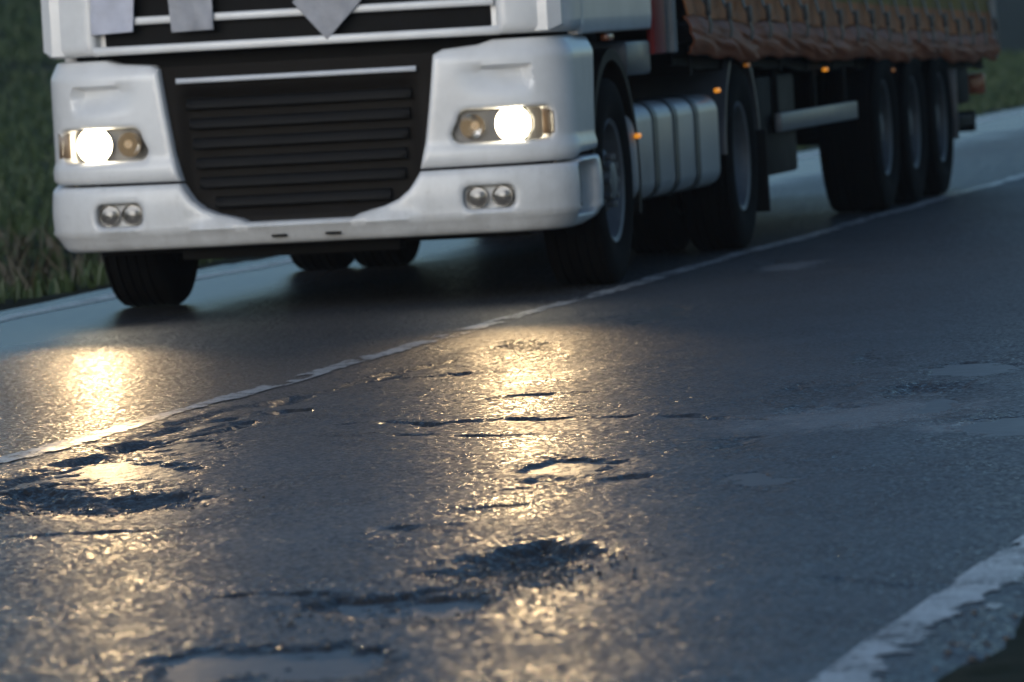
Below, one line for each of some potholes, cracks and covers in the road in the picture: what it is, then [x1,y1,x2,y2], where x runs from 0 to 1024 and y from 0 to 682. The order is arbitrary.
crack [318,359,775,438]
pothole [474,339,569,365]
pothole [47,460,210,498]
pothole [409,536,613,591]
pothole [132,639,414,682]
pothole [0,481,223,522]
pothole [868,379,997,402]
pothole [507,456,637,485]
